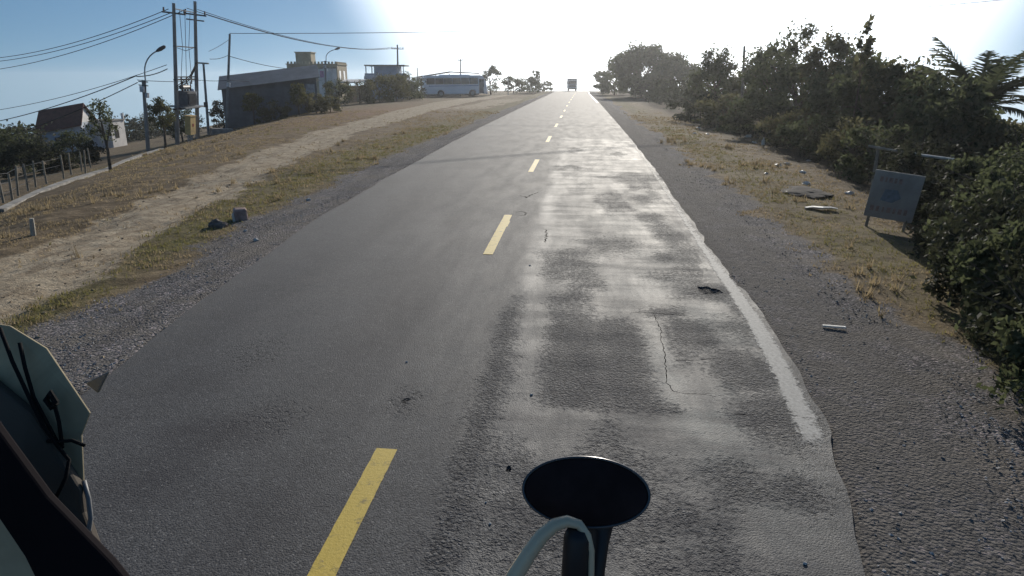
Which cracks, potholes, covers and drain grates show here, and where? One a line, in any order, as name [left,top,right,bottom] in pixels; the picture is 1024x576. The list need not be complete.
pothole [697,286,723,295]
crack [642,313,717,395]
